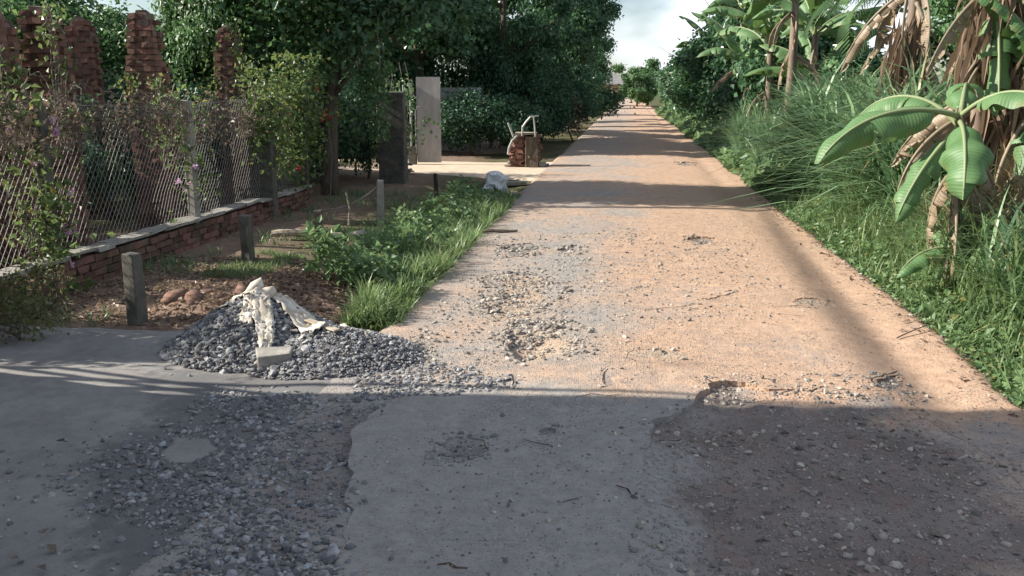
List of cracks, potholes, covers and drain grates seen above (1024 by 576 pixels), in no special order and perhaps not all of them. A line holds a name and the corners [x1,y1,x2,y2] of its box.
pothole [474,270,573,322]
pothole [682,234,717,245]
pothole [497,315,594,366]
pothole [864,372,914,395]
